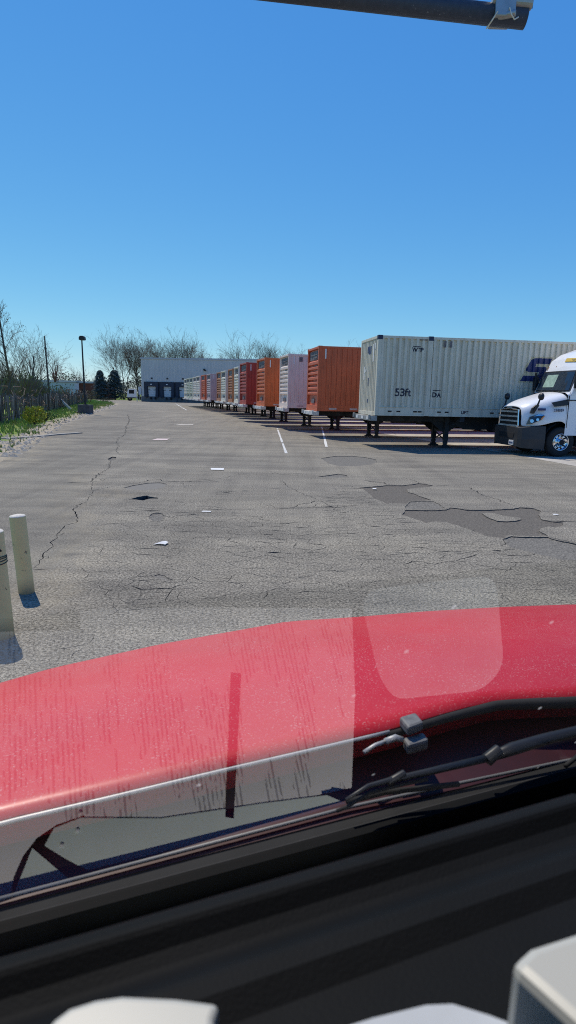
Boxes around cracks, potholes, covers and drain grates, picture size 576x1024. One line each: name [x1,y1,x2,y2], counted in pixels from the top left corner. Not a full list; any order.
crack [50,473,576,659]
